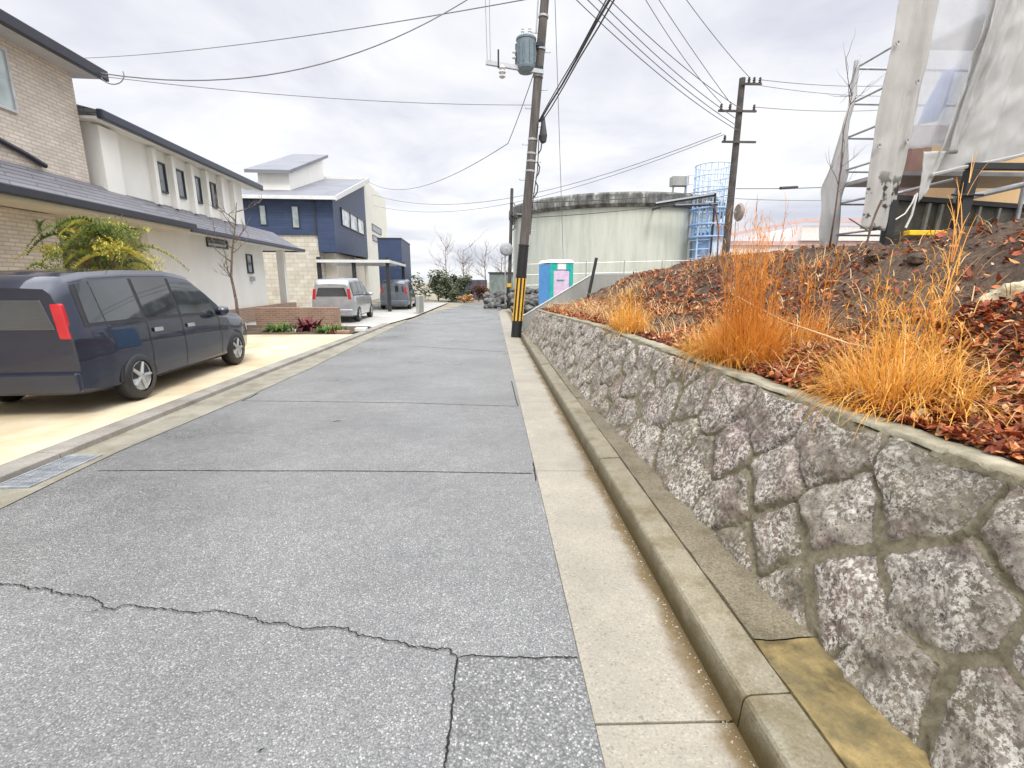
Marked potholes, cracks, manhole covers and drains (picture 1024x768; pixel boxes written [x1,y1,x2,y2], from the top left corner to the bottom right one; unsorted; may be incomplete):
drain grate [0,454,103,489]
crack [0,583,577,768]
